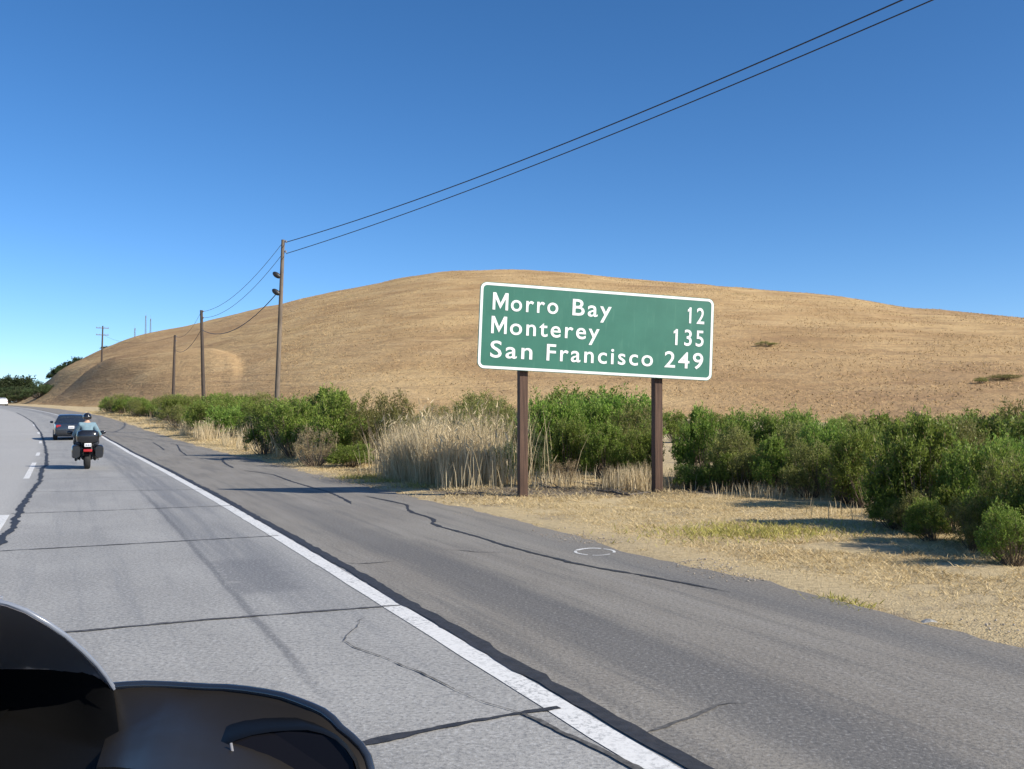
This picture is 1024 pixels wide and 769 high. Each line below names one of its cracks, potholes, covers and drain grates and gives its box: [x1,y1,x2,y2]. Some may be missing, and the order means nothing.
crack [344,618,738,769]
